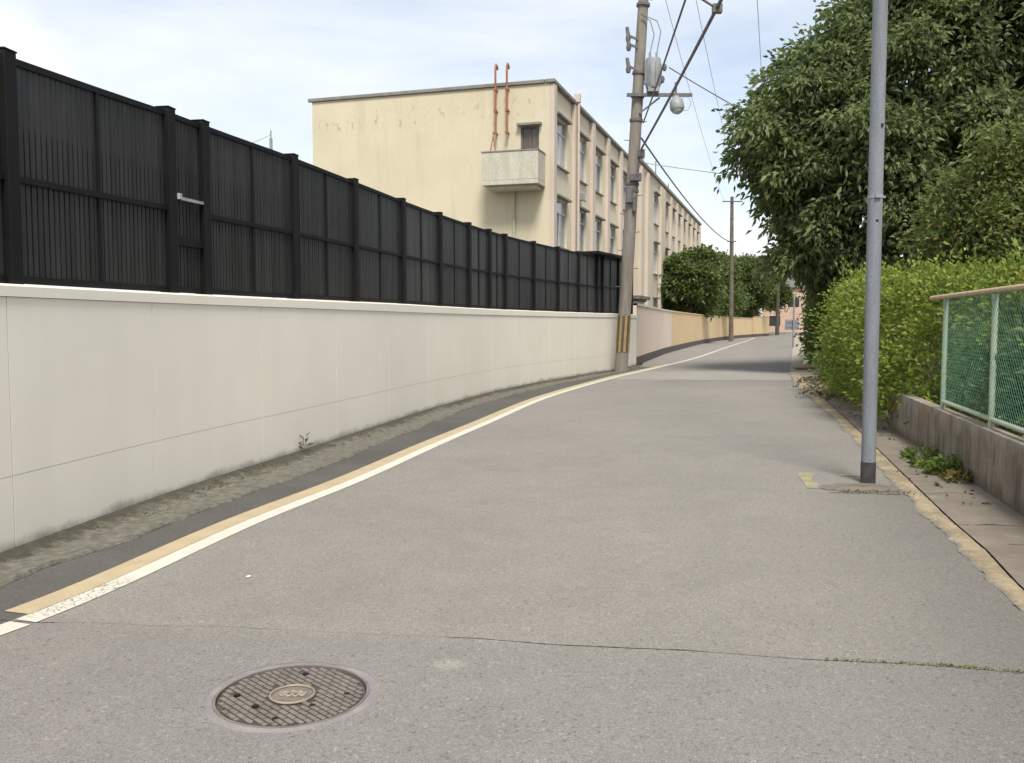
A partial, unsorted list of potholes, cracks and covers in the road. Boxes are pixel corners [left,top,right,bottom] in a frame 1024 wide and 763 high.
manhole cover [203,662,380,733]
